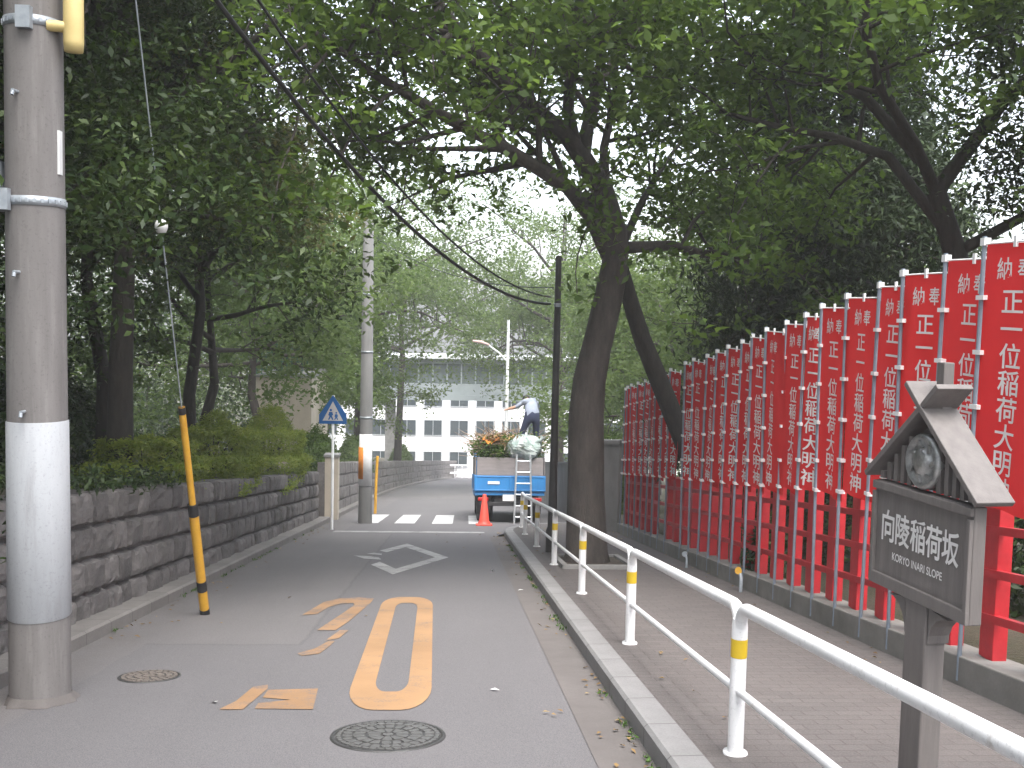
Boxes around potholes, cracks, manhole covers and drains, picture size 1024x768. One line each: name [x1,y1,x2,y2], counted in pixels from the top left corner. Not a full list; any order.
manhole cover [330,720,446,753]
manhole cover [117,669,181,683]
